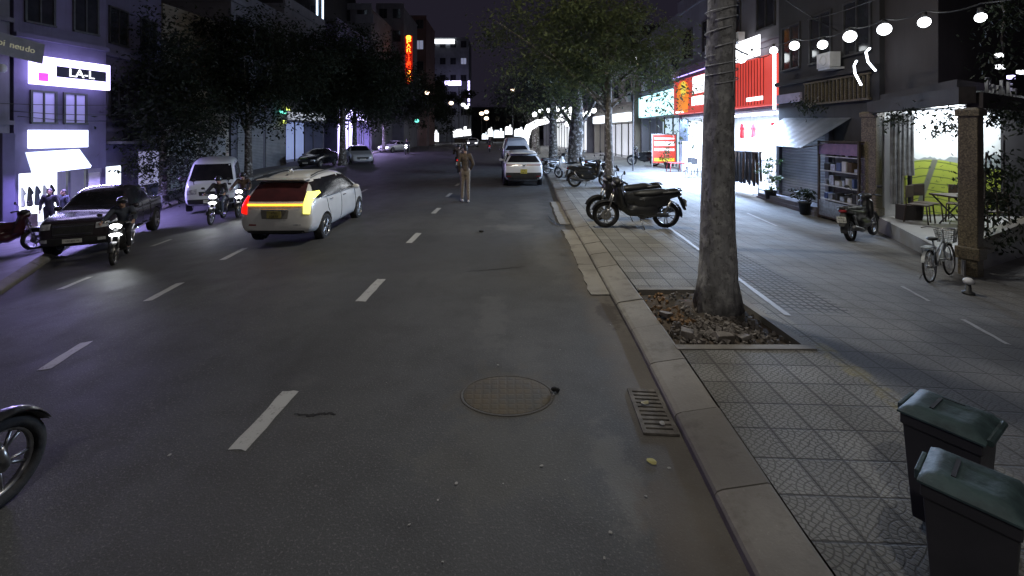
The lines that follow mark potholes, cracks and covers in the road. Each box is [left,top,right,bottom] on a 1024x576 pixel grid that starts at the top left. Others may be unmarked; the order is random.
drain grate [627,388,680,437]
manhole cover [460,375,554,417]
